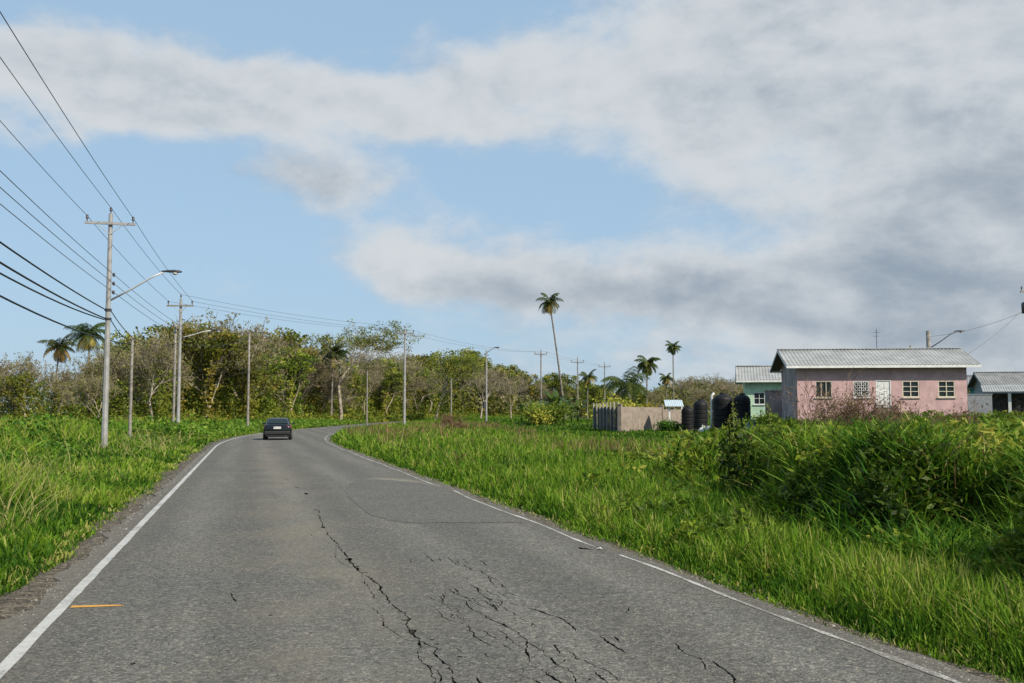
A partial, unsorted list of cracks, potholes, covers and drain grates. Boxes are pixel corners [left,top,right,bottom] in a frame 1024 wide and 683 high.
crack [599,635,625,653]
crack [311,510,462,683]
crack [676,644,736,683]
crack [410,553,619,683]
